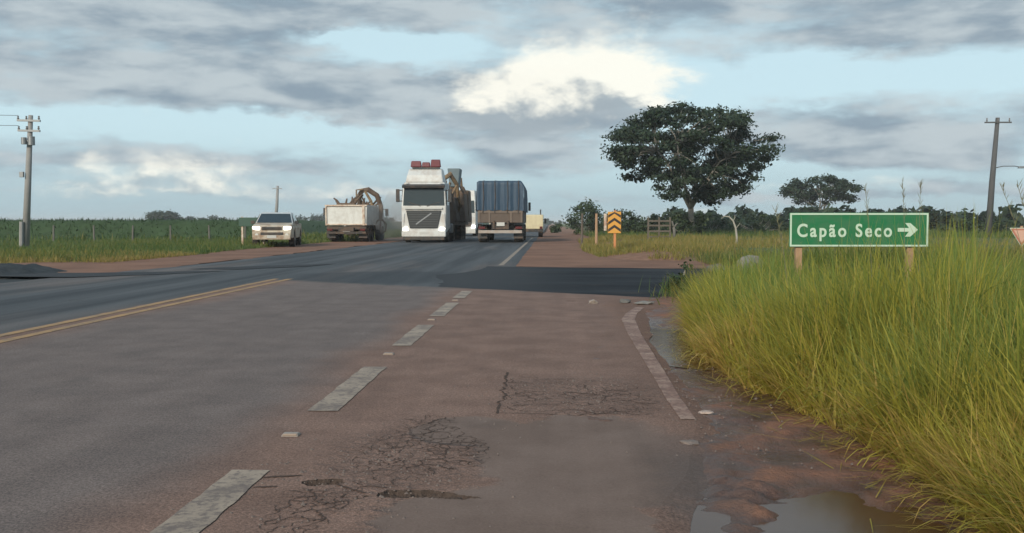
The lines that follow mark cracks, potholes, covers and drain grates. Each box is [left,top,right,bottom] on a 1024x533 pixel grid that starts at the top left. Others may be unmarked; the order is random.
crack [255,413,499,533]
pothole [353,490,480,500]
pothole [301,478,345,486]
crack [496,372,657,416]
